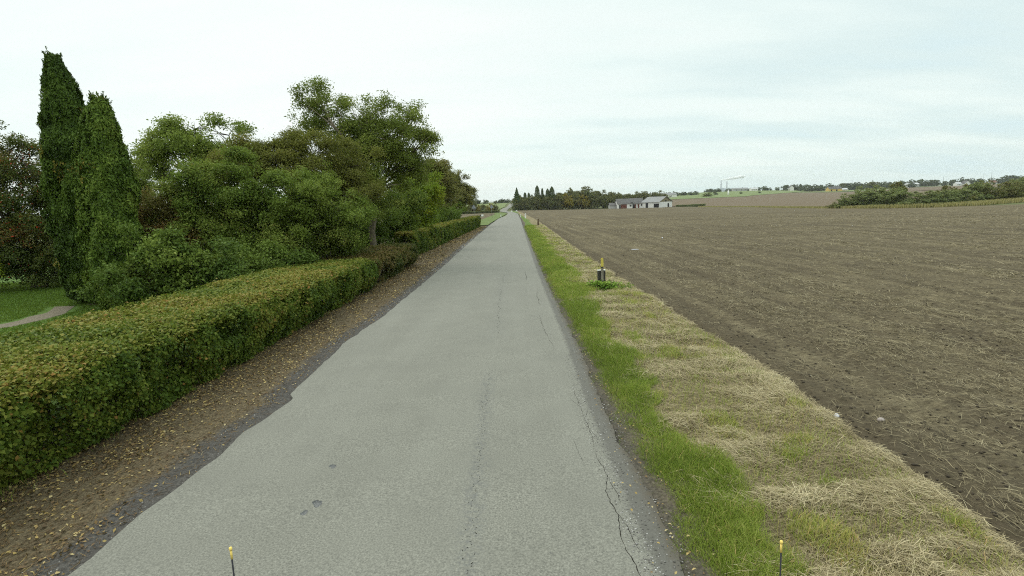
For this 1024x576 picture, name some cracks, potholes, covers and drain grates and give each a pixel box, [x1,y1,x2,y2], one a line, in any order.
crack [574,391,640,575]
